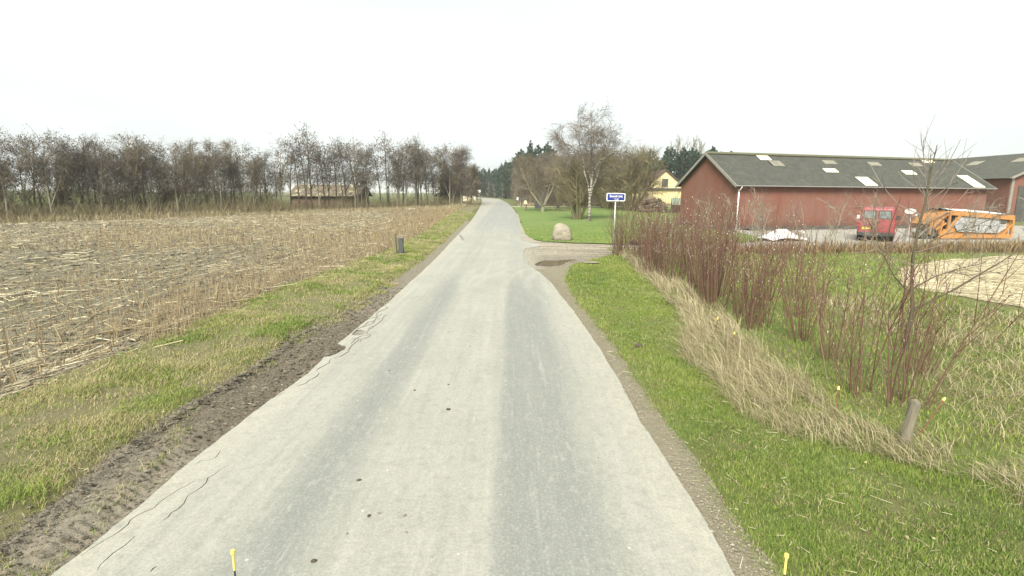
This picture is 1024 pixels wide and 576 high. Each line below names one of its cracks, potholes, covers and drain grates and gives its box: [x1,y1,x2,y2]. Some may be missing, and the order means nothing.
pothole [534,259,574,267]
crack [88,450,226,565]
crack [299,307,388,386]
